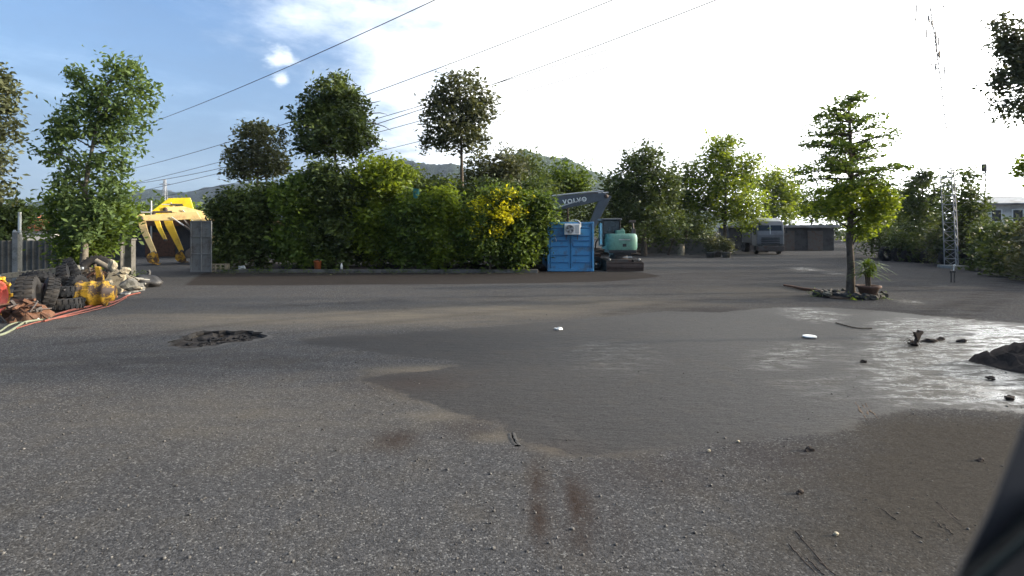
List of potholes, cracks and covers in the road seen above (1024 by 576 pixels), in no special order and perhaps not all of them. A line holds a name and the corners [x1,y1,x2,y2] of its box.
pothole [159,329,274,351]
